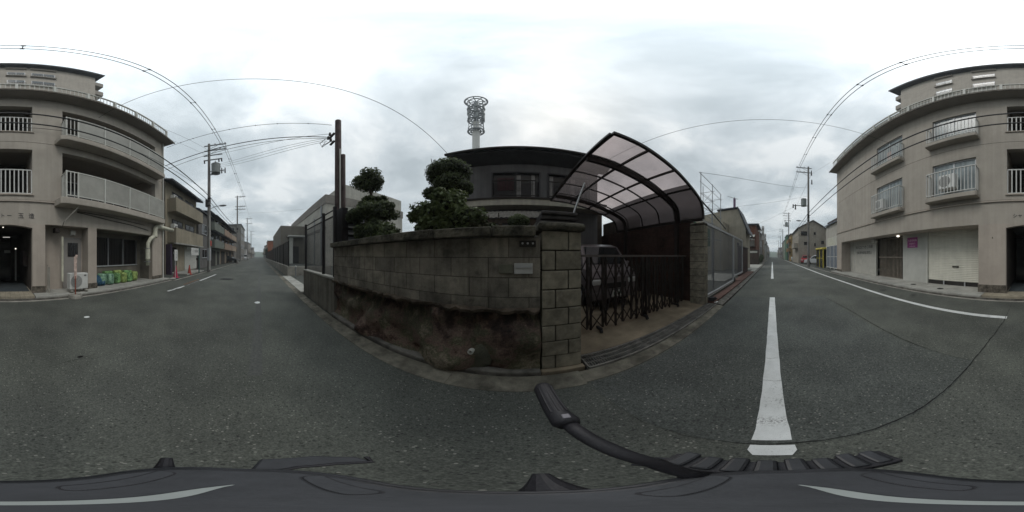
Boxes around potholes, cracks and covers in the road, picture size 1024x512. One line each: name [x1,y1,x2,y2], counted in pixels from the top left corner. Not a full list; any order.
drain grate [580,303,717,370]
